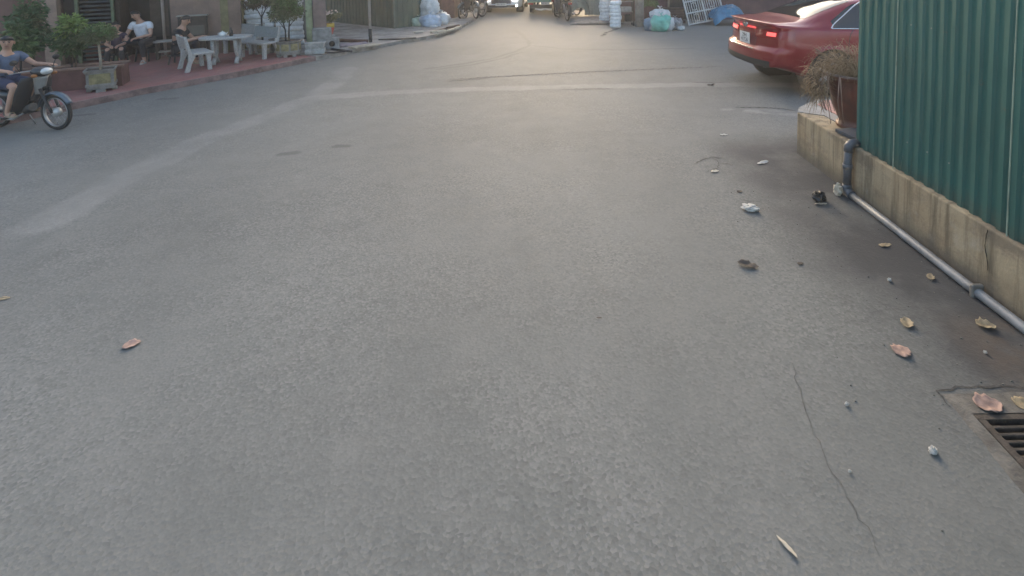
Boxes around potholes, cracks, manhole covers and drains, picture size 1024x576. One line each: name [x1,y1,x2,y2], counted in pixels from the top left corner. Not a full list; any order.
crack [789,365,880,556]
crack [936,385,1024,405]
